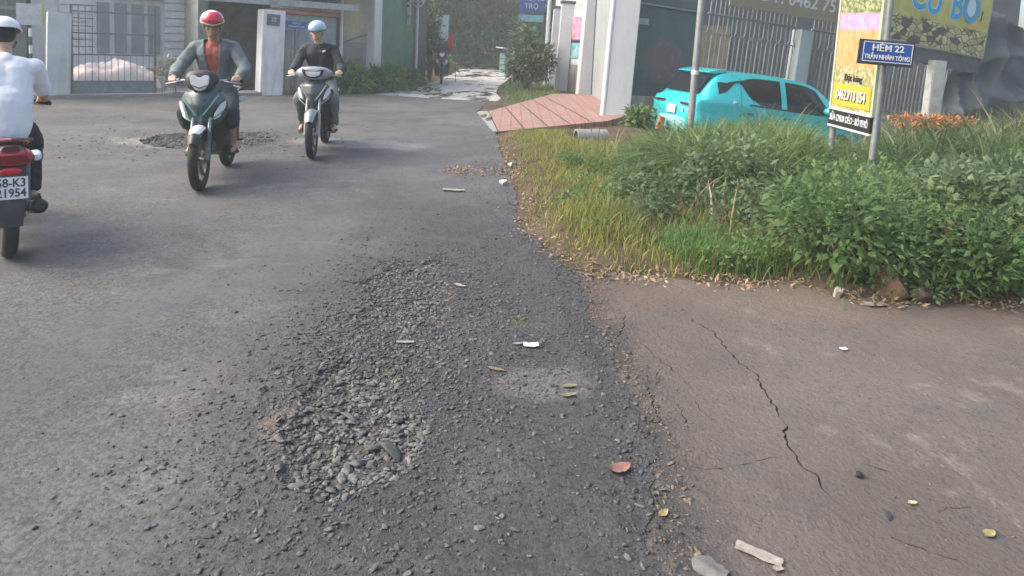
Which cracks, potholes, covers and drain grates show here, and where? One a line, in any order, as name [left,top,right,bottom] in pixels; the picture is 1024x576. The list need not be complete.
pothole [138,131,281,149]
crack [690,319,839,504]
pothole [268,358,433,506]
pothole [340,257,457,338]
crack [612,314,706,424]
